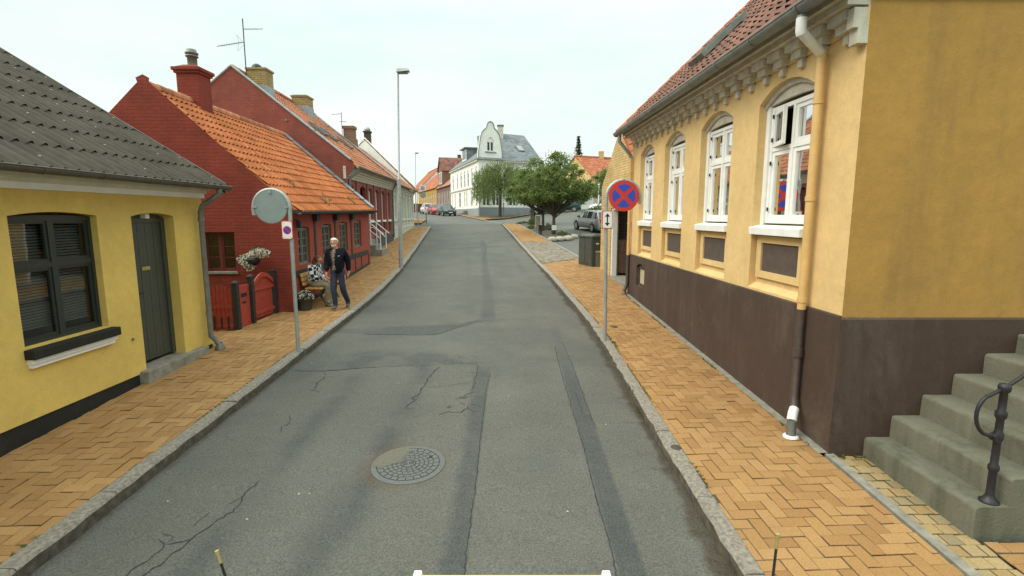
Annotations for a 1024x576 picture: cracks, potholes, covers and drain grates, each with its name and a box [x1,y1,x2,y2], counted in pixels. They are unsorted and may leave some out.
crack [406,366,479,415]
crack [126,482,257,576]
manhole cover [370,446,446,485]
